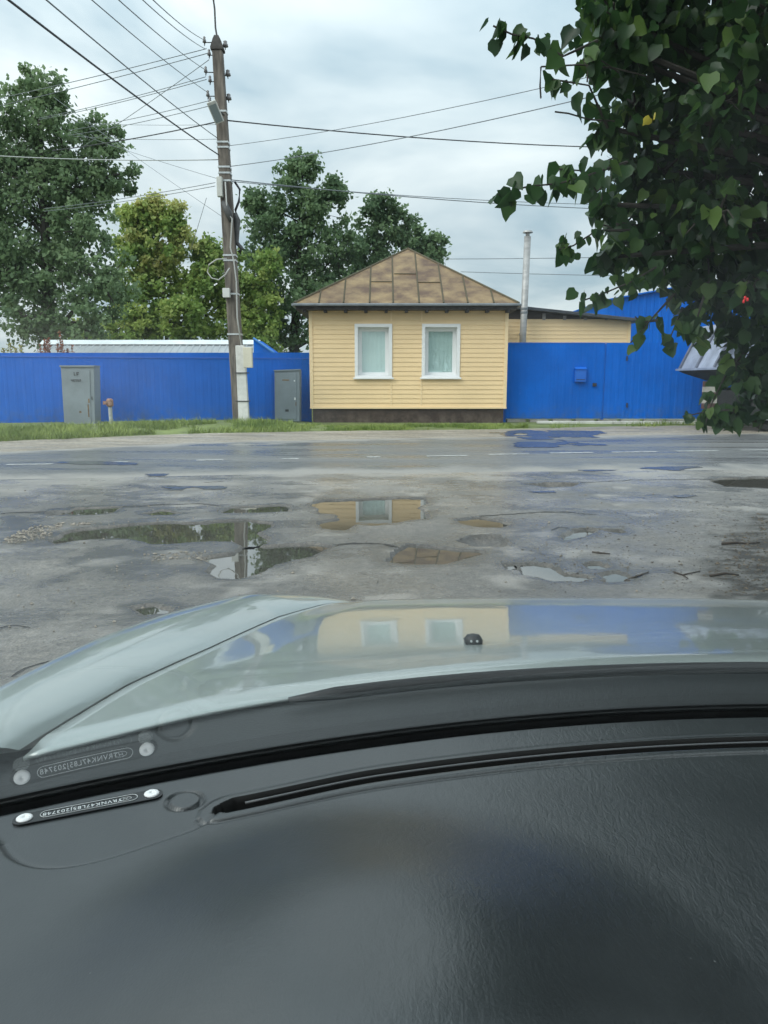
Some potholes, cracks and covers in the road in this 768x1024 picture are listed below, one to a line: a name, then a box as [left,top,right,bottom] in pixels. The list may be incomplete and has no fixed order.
pothole [193,542,332,579]
pothole [512,561,596,582]
crack [479,511,597,530]
pothole [61,506,123,515]
pothole [454,516,512,528]
pothole [559,527,598,540]
pothole [219,504,293,513]
pothole [457,533,510,547]
pothole [49,519,275,549]
pothole [310,497,430,530]
pothole [709,476,768,488]
pothole [386,543,486,565]
